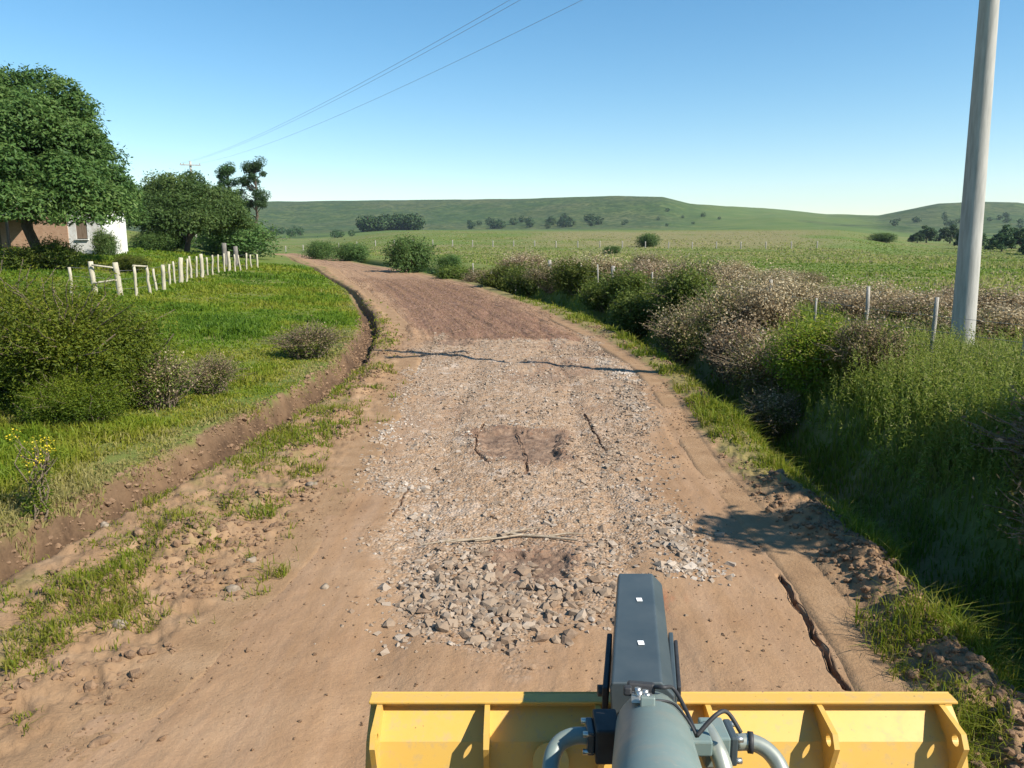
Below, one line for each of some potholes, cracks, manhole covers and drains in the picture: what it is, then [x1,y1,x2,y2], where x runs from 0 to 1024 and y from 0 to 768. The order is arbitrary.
pothole [487,551,573,584]
crack [779,576,846,691]
crack [583,413,607,451]
crack [515,435,529,475]
crack [474,422,489,463]
